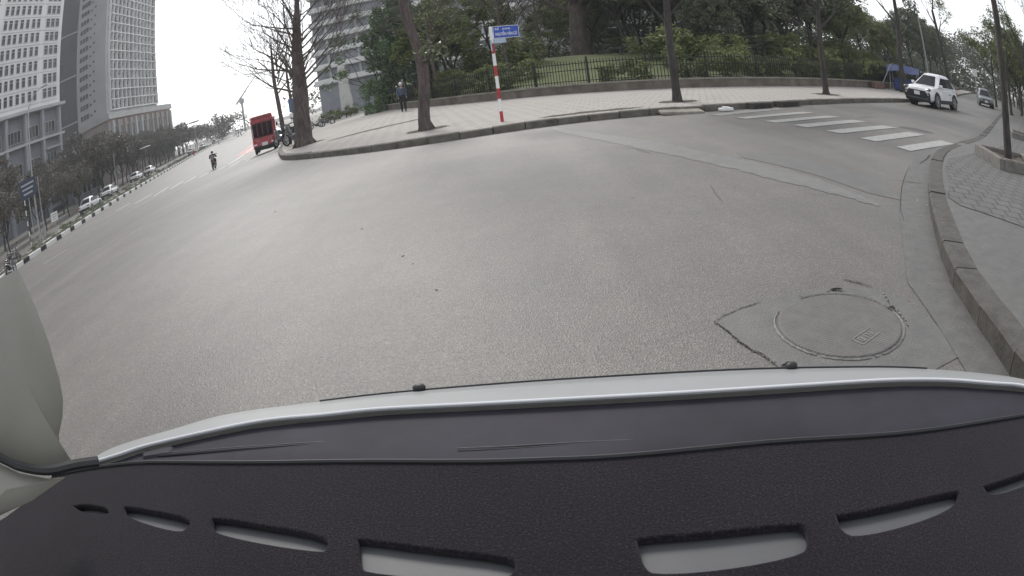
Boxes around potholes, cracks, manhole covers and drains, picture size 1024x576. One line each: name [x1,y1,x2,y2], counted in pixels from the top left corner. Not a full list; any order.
manhole cover [773,293,906,360]
crack [826,278,909,327]
